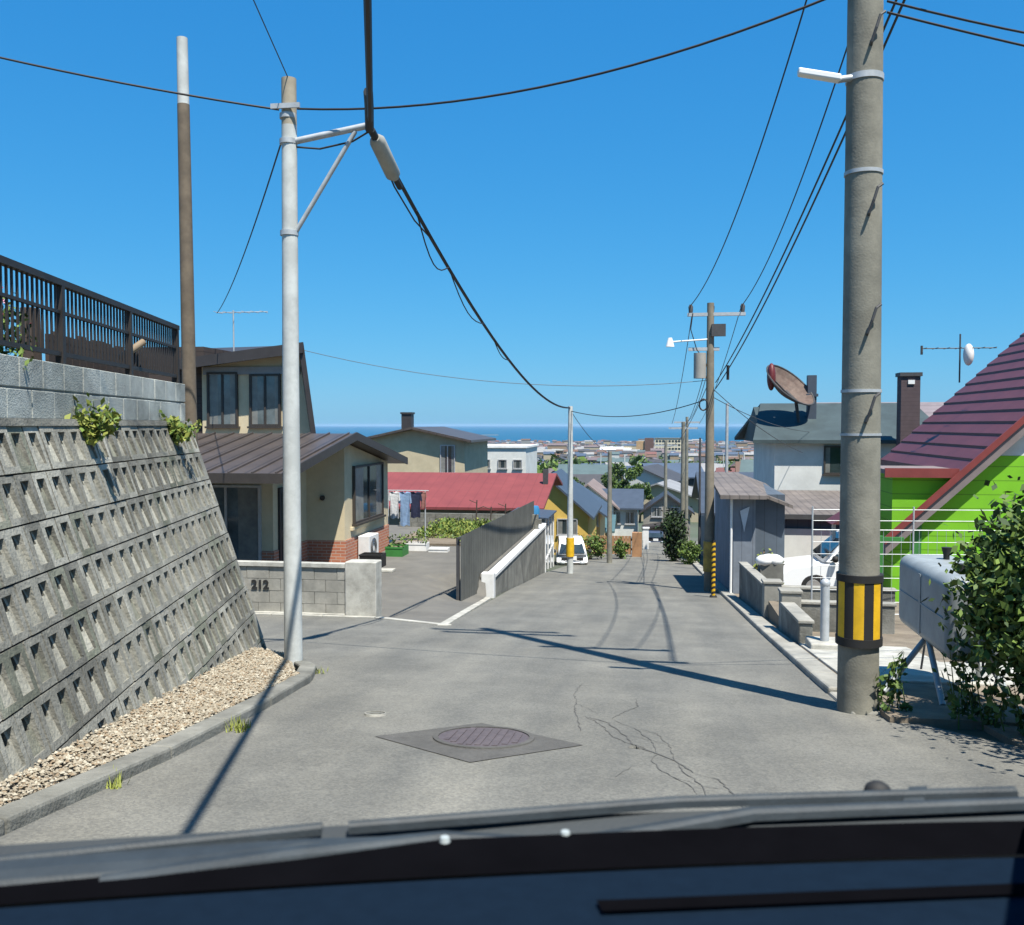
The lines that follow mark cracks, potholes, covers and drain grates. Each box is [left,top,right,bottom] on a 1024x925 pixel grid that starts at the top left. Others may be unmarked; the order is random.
manhole cover [433,726,535,749]
crack [573,684,734,795]
